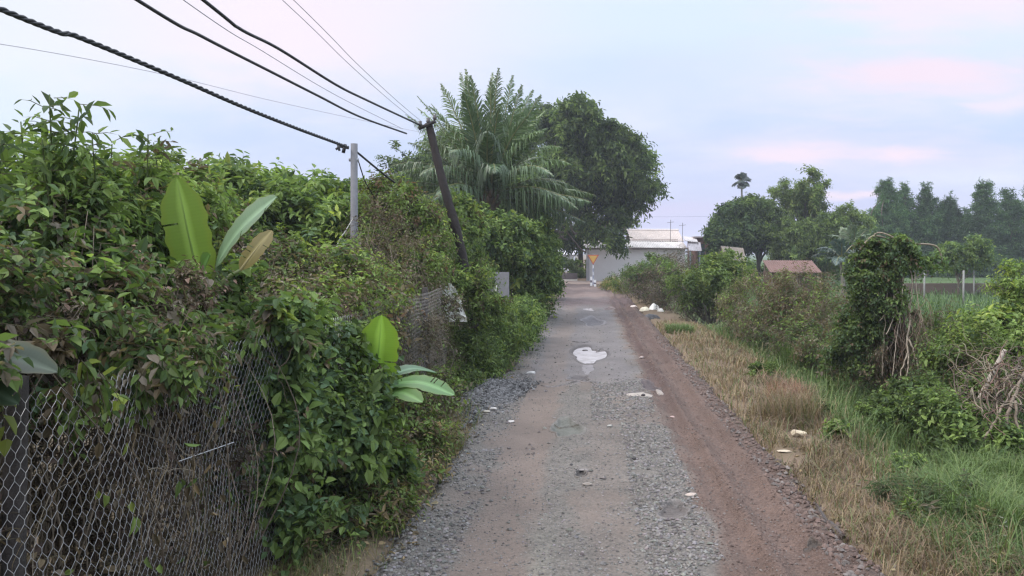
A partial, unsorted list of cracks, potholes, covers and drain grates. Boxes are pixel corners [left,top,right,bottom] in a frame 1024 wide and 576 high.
pothole [569,344,611,365]
pothole [548,415,587,438]
pothole [655,499,692,521]
pothole [579,315,607,327]
